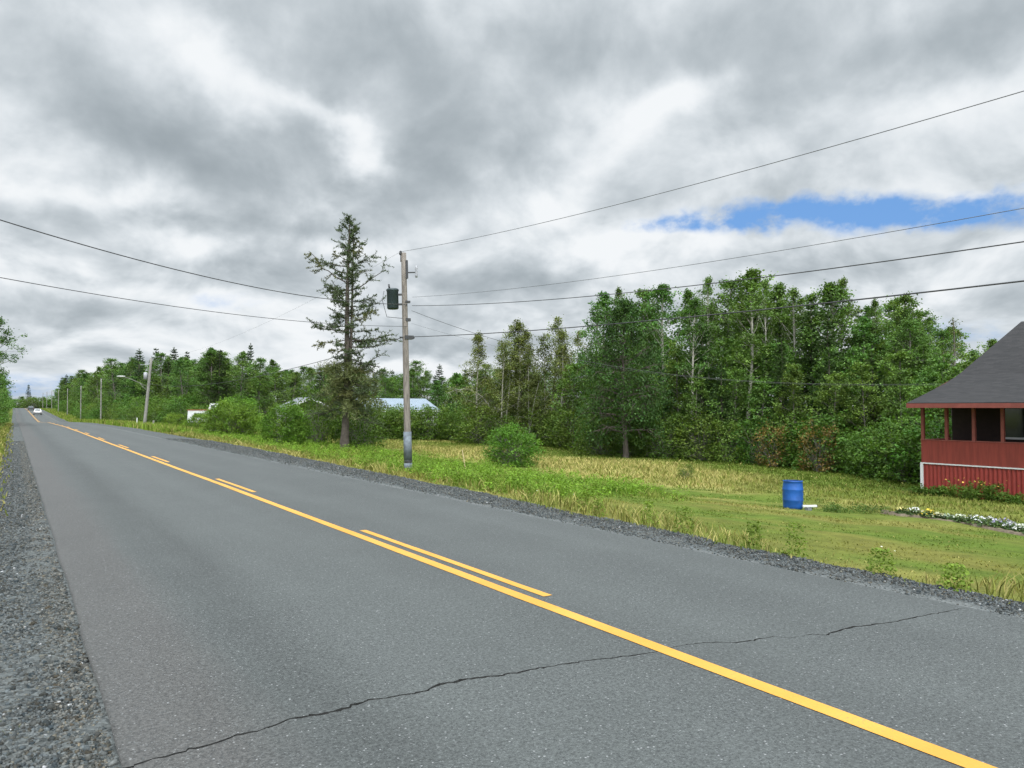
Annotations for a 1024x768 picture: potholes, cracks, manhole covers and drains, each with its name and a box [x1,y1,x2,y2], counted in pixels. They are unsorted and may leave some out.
crack [124,608,962,768]
